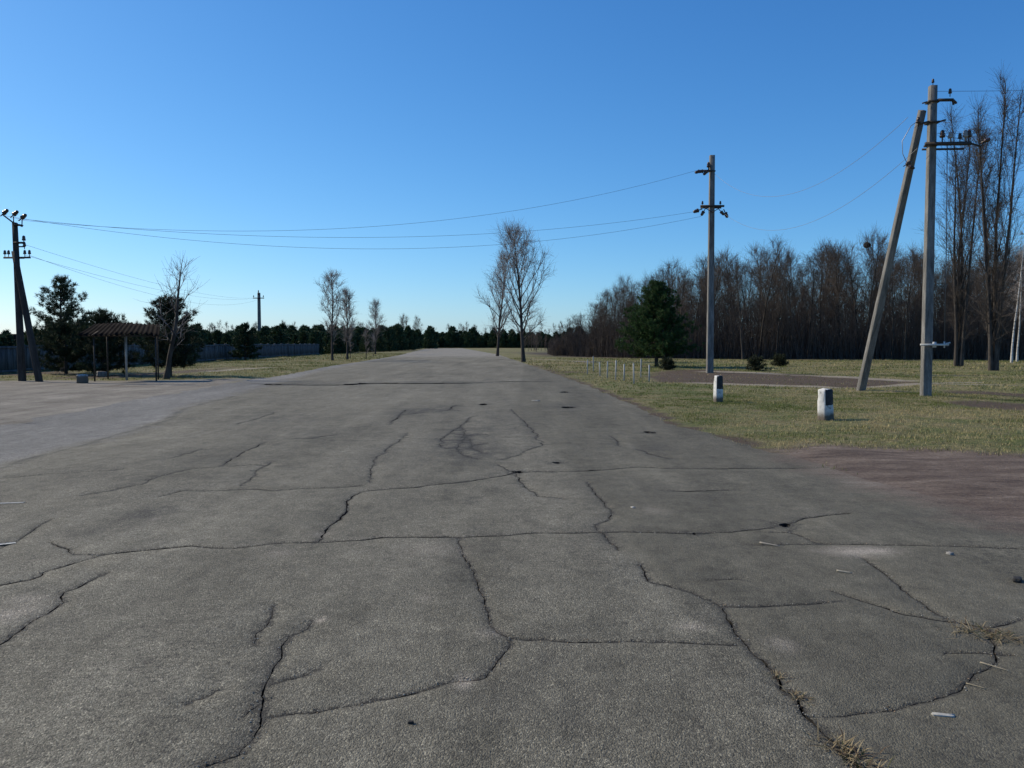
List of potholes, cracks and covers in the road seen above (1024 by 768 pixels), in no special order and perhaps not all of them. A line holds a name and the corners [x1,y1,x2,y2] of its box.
crack [500,413,560,499]
crack [203,607,314,768]
crack [0,438,1023,718]
